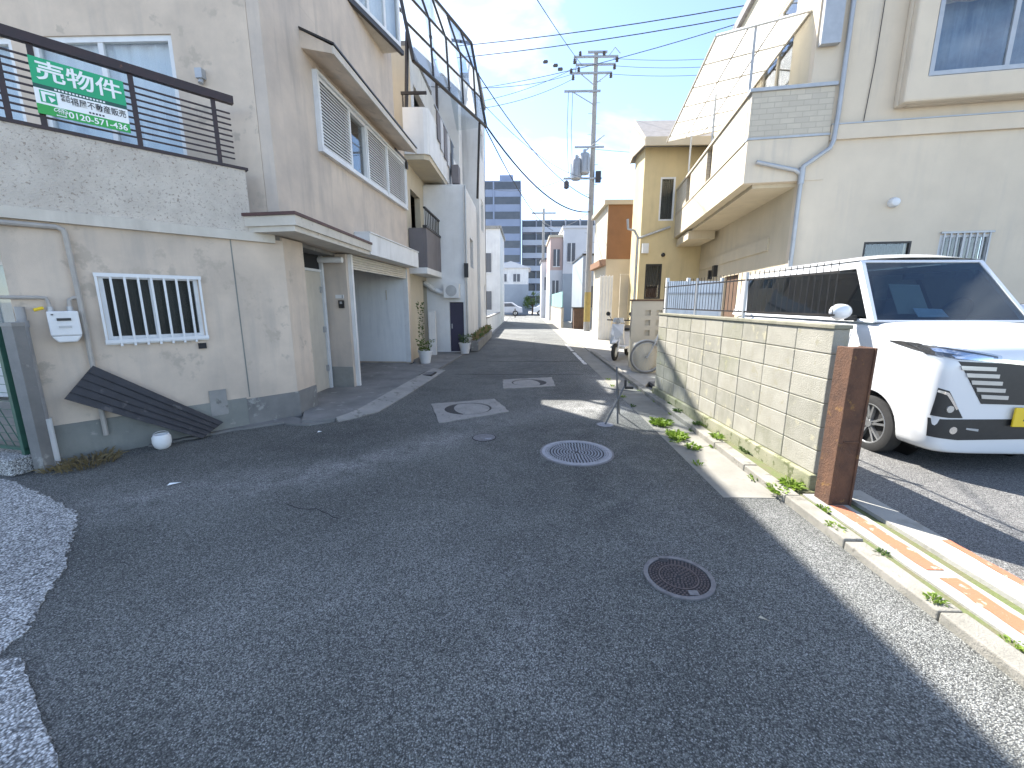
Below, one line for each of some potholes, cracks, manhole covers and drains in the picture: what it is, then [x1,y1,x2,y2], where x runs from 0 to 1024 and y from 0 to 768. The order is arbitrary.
manhole cover [643,556,716,601]
manhole cover [431,399,510,424]
manhole cover [472,434,496,442]
manhole cover [540,440,614,467]
manhole cover [502,377,555,389]
